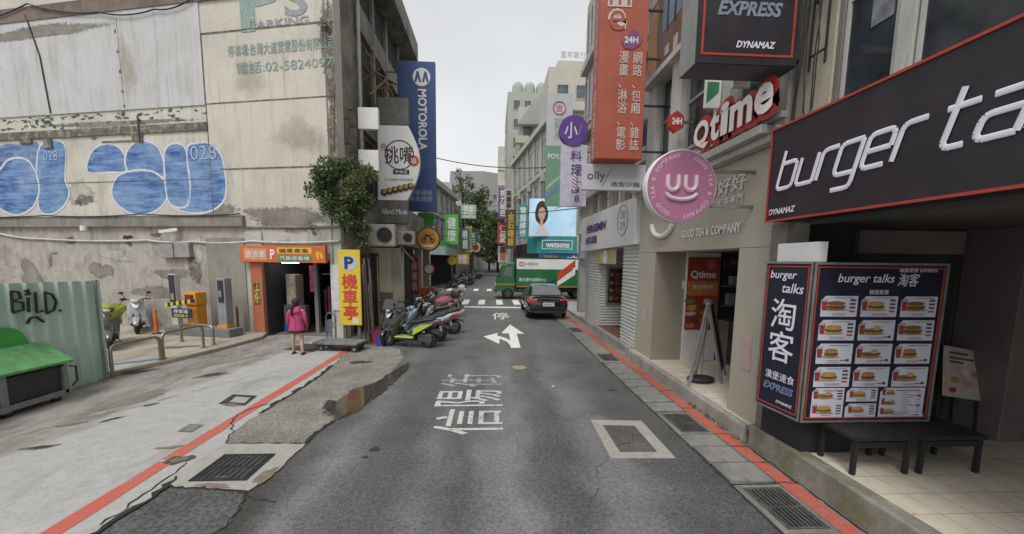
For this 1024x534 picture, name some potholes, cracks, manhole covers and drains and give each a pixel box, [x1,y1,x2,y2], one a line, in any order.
manhole cover [218,394,256,406]
drain grate [593,354,621,362]
drain grate [733,484,840,534]
crack [225,365,352,444]
crack [585,434,633,522]
drain grate [656,412,714,435]
